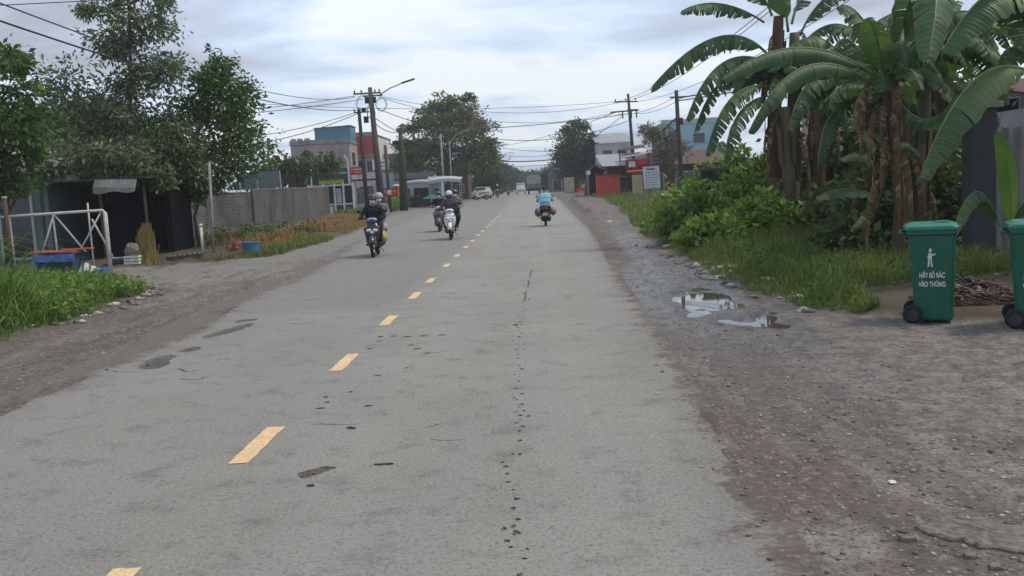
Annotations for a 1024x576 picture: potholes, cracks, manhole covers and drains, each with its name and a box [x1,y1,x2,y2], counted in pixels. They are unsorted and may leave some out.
pothole [201,323,255,338]
pothole [137,355,177,369]
pothole [297,466,336,478]
